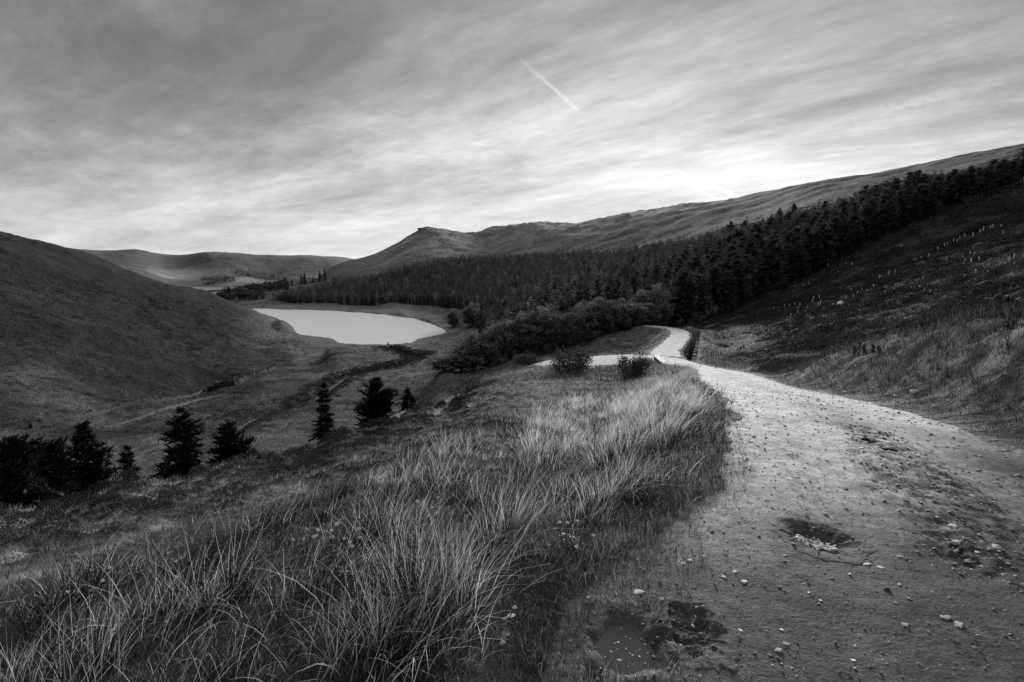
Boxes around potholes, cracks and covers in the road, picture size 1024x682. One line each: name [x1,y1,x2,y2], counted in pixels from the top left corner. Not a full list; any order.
pothole [872,446,905,455]
pothole [770,515,880,566]
pothole [851,434,886,449]
pothole [935,536,980,565]
